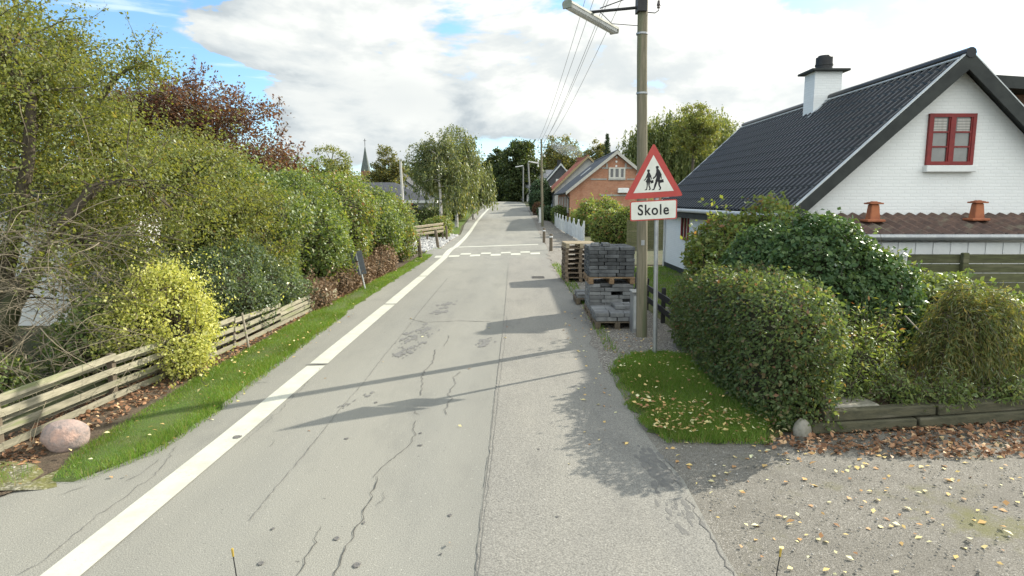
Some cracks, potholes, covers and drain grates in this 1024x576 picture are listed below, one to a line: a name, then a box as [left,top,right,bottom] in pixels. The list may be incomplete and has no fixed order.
crack [296,336,449,576]
